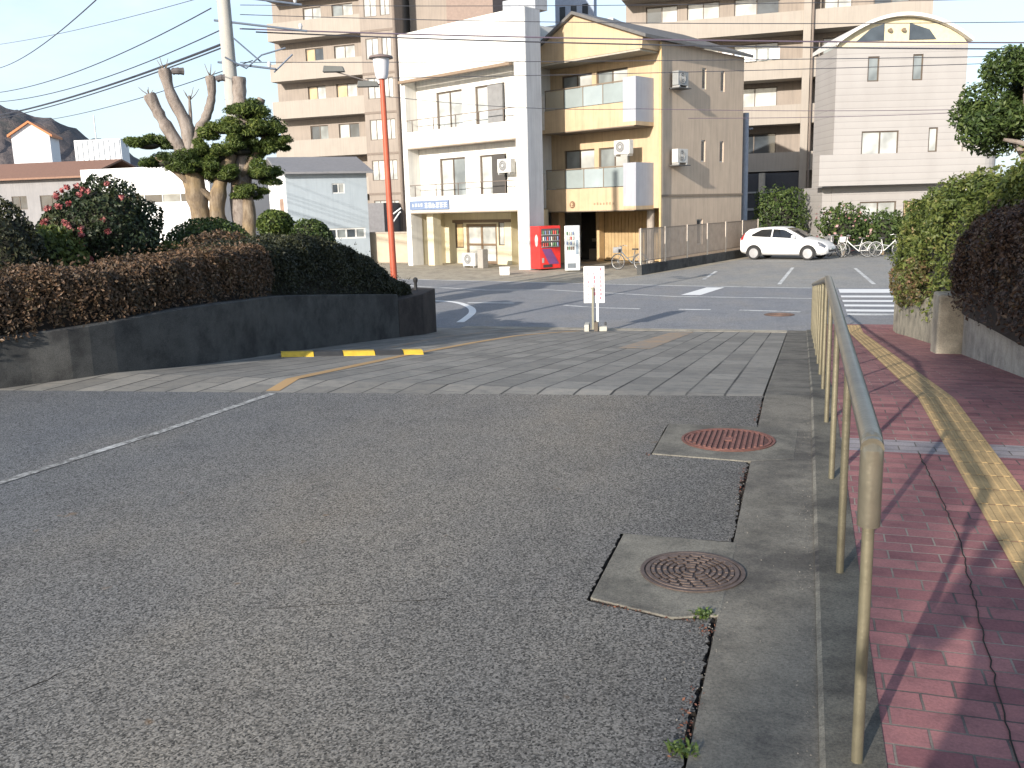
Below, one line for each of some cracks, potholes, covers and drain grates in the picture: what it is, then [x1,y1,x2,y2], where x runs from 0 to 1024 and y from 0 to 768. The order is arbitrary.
manhole cover [681,428,776,452]
manhole cover [640,551,746,593]
